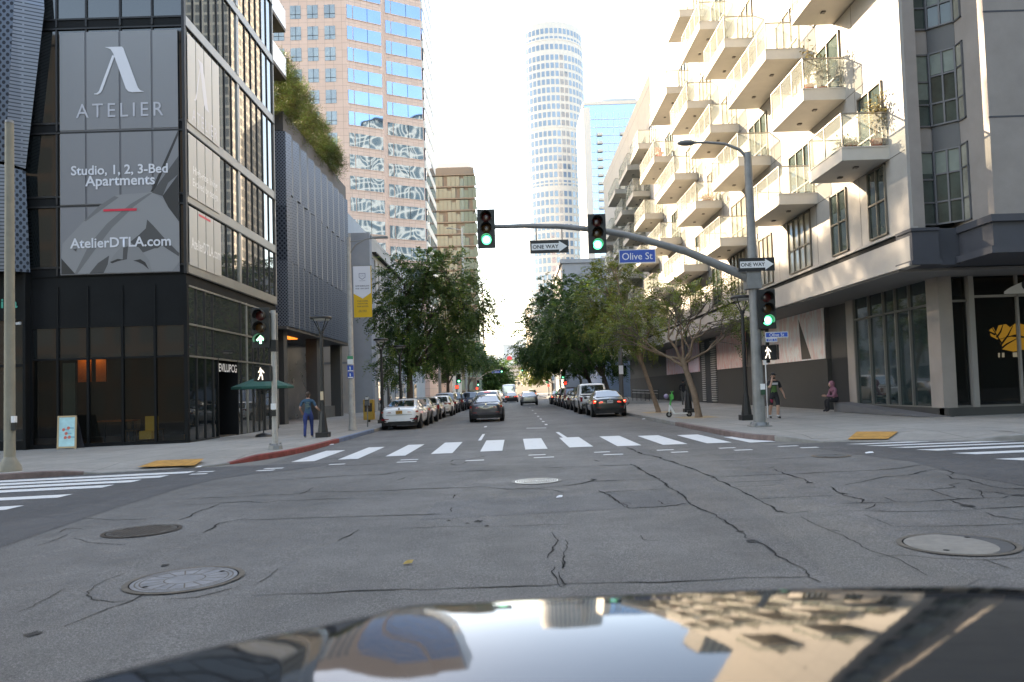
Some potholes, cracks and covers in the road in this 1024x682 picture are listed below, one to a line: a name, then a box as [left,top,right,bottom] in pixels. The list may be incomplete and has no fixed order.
manhole cover [896,533,1023,556]
crack [65,573,144,626]
manhole cover [121,566,245,594]
crack [498,447,1024,582]
crack [180,504,245,533]
manhole cover [100,524,183,538]
